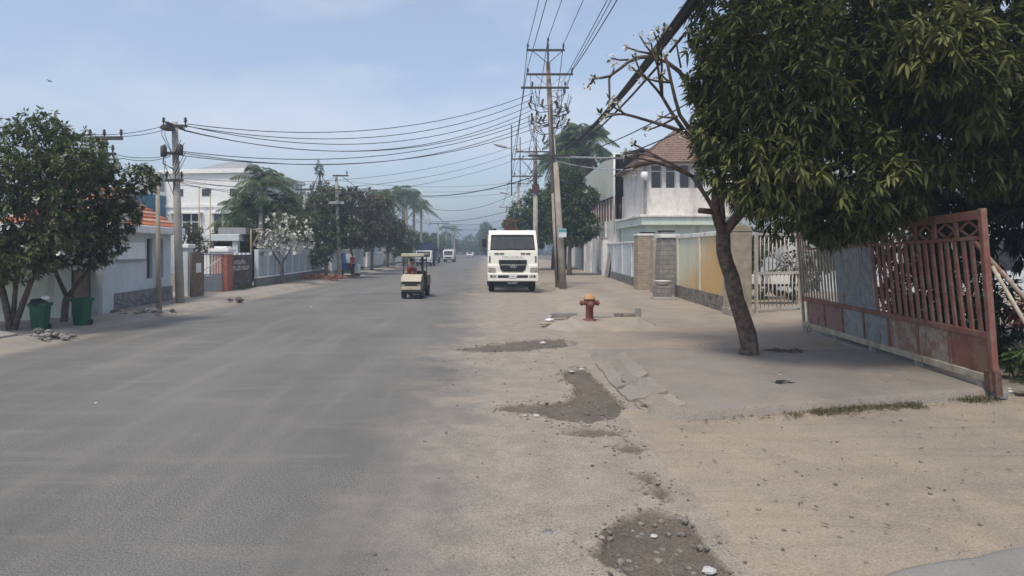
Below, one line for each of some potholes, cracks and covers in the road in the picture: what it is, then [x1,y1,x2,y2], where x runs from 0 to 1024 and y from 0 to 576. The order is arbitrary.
pothole [557,503,747,576]
pothole [494,366,628,426]
pothole [620,470,696,507]
pothole [593,438,651,459]
pothole [532,422,635,443]
pothole [451,339,578,353]
